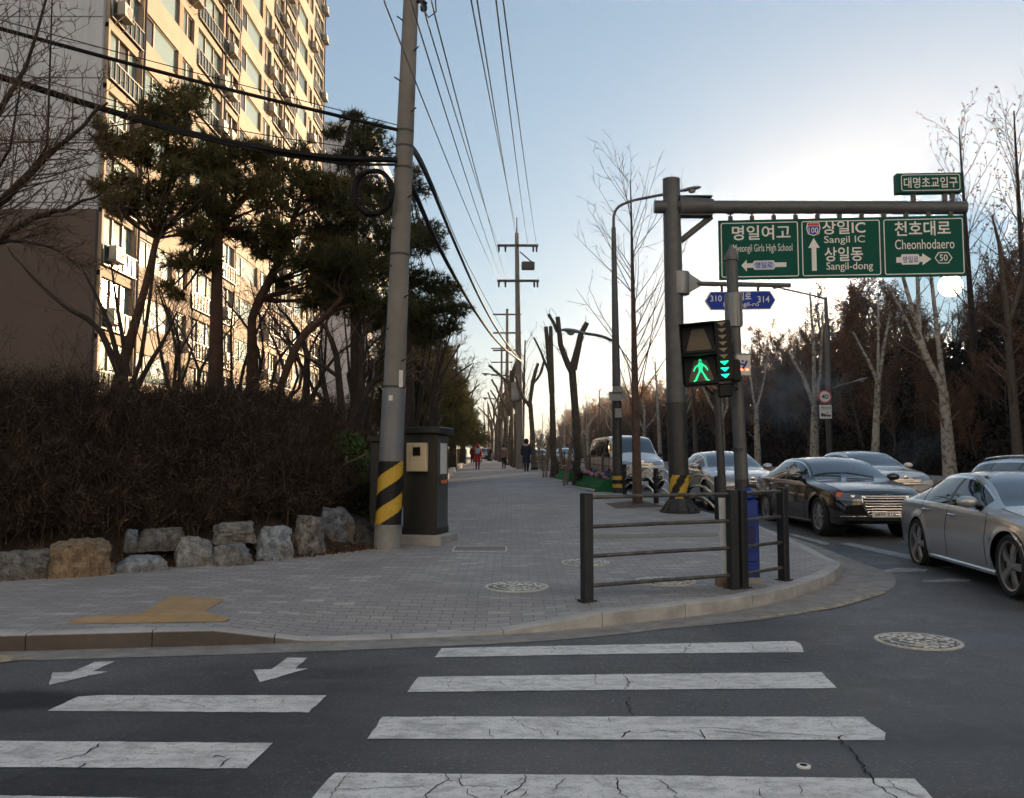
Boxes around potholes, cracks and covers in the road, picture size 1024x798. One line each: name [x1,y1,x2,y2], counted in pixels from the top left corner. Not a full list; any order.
manhole cover [635,576,697,587]
manhole cover [485,581,549,593]
manhole cover [874,632,964,651]
manhole cover [561,559,610,567]
crack [594,641,923,798]
